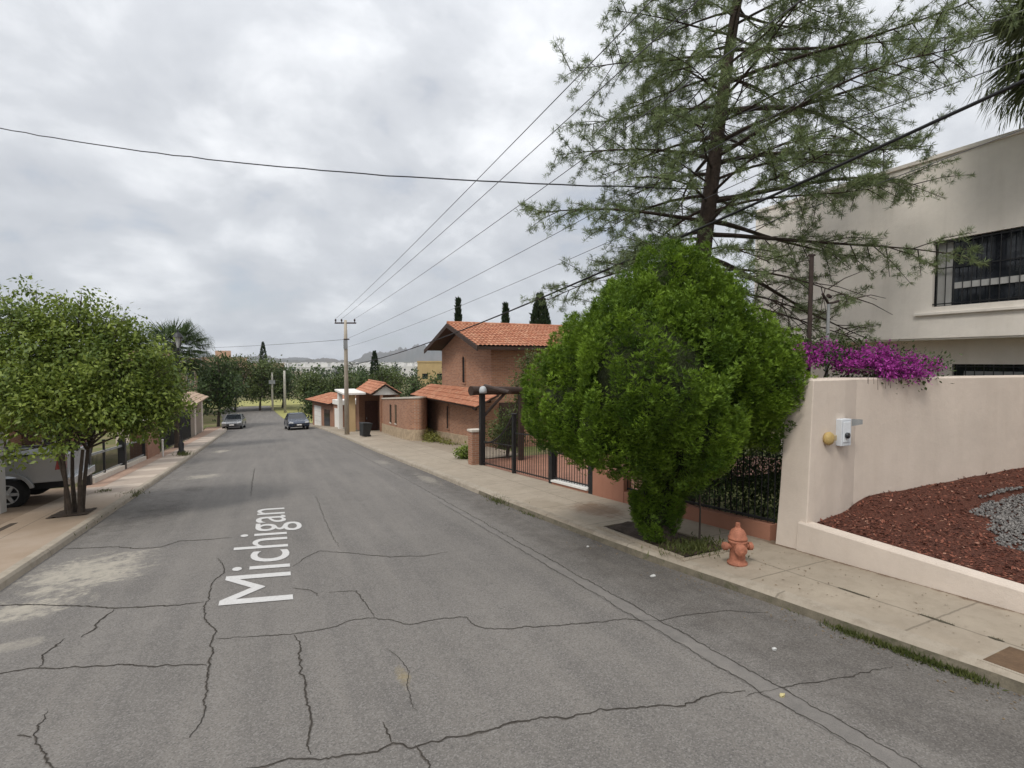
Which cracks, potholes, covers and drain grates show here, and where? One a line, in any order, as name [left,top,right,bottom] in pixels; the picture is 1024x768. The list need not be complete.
crack [217,442,922,768]
crack [0,559,225,738]
crack [17,711,54,768]
utility cover [977,645,1024,677]
